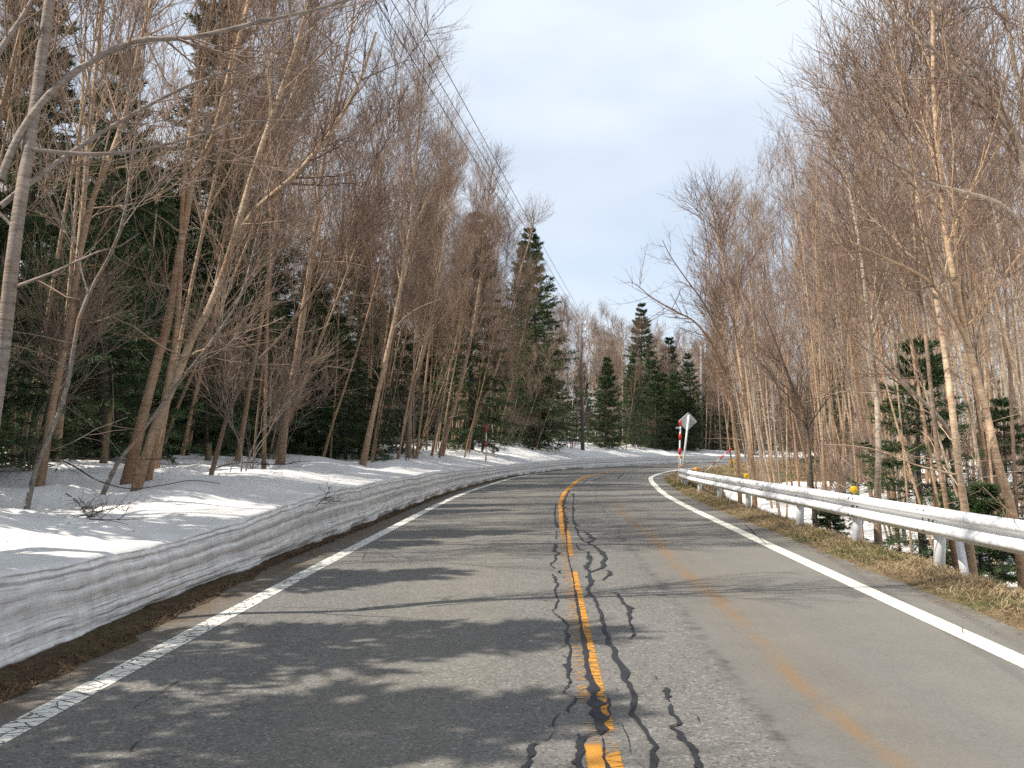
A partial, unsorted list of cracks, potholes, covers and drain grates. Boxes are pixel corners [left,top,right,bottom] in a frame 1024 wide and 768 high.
crack [550,471,631,578]
